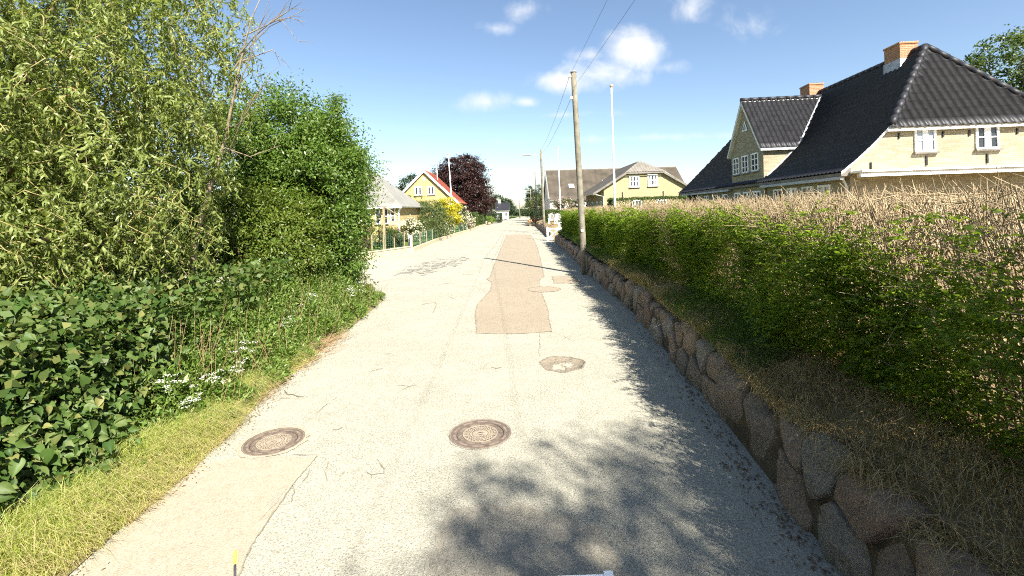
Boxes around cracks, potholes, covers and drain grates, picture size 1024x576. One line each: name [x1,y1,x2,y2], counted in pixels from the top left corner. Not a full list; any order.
manhole cover [449,419,511,449]
manhole cover [241,428,305,456]
